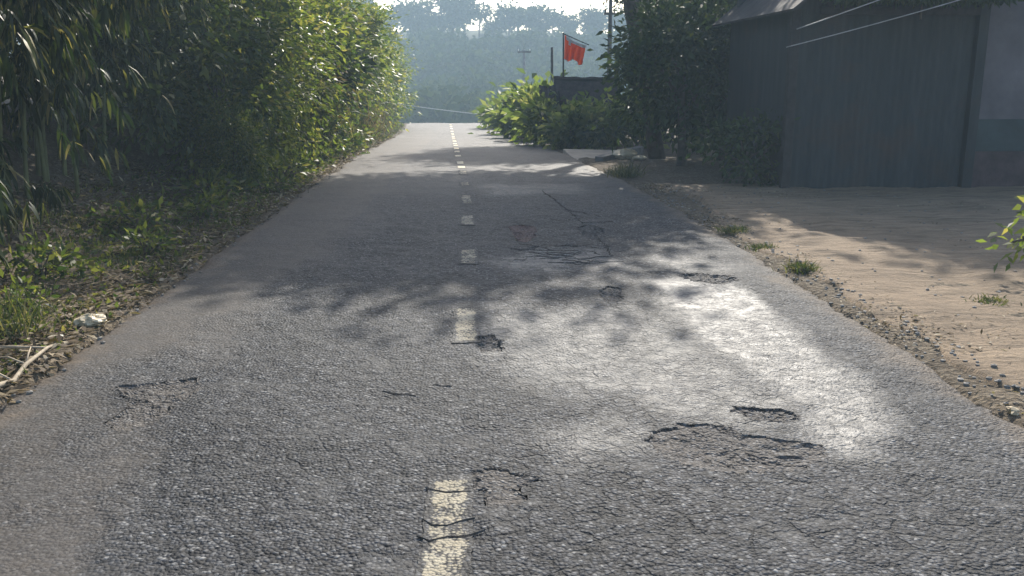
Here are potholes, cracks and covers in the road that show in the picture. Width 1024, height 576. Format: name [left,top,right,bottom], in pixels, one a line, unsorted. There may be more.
pothole [640,422,831,475]
pothole [476,334,504,352]
crack [417,517,485,542]
crack [513,191,624,265]
pothole [729,406,800,424]
pothole [599,285,624,302]
pothole [678,272,740,284]
